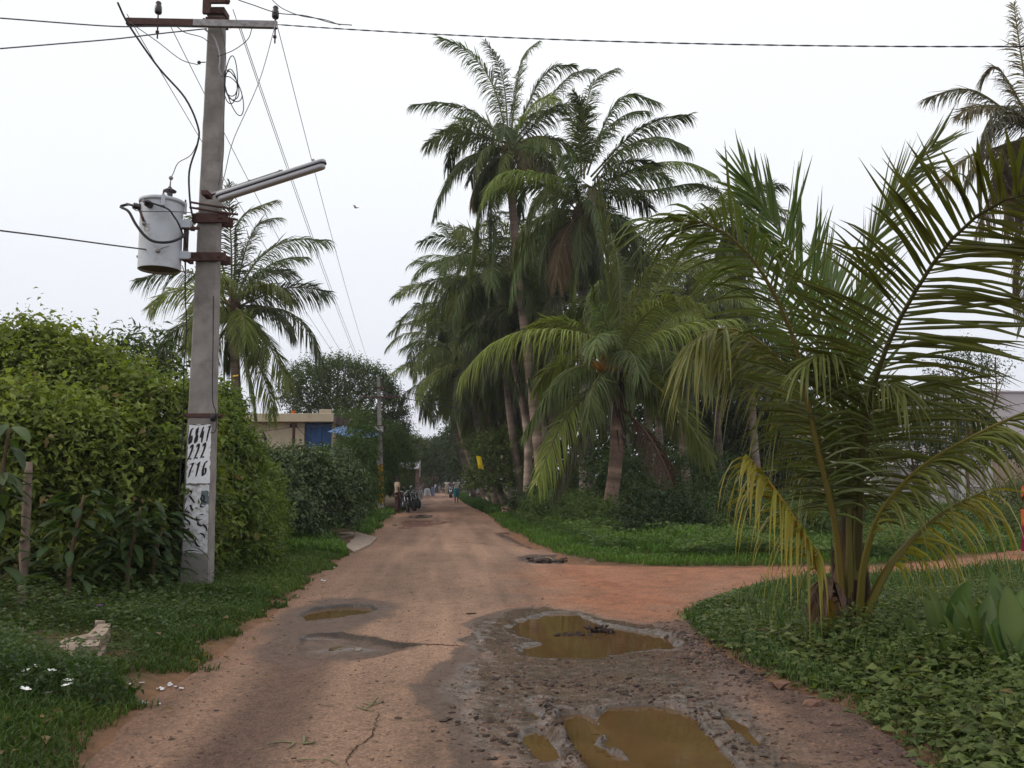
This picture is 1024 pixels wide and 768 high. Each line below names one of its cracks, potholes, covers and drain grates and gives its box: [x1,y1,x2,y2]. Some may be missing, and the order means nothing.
pothole [552,706,632,768]
pothole [513,720,571,762]
crack [346,713,379,766]
pothole [523,703,553,720]
pothole [517,554,595,565]
pothole [588,700,751,768]
pothole [296,603,381,621]
pothole [293,632,422,660]
pothole [499,610,689,661]
